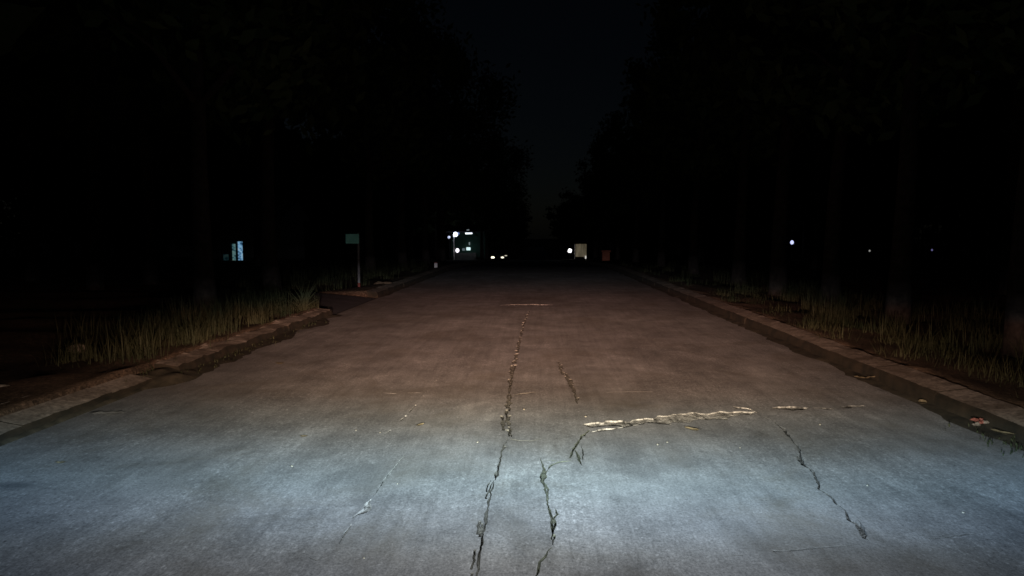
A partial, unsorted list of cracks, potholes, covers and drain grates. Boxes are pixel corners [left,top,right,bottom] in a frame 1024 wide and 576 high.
crack [535,362,984,576]
crack [470,304,542,576]
crack [339,456,404,544]
